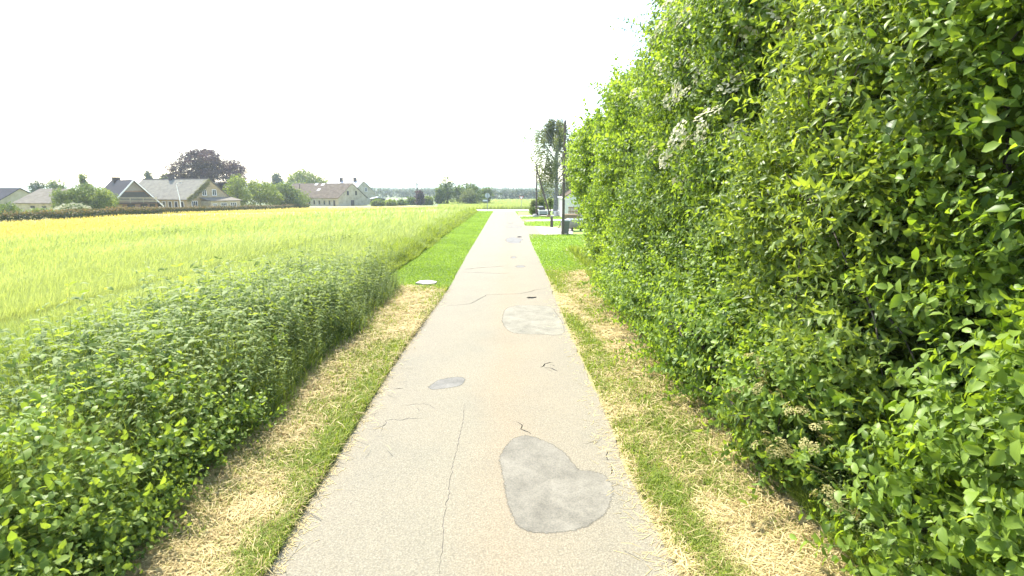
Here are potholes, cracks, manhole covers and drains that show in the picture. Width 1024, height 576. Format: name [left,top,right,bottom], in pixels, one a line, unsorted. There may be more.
crack [439,405,465,576]
